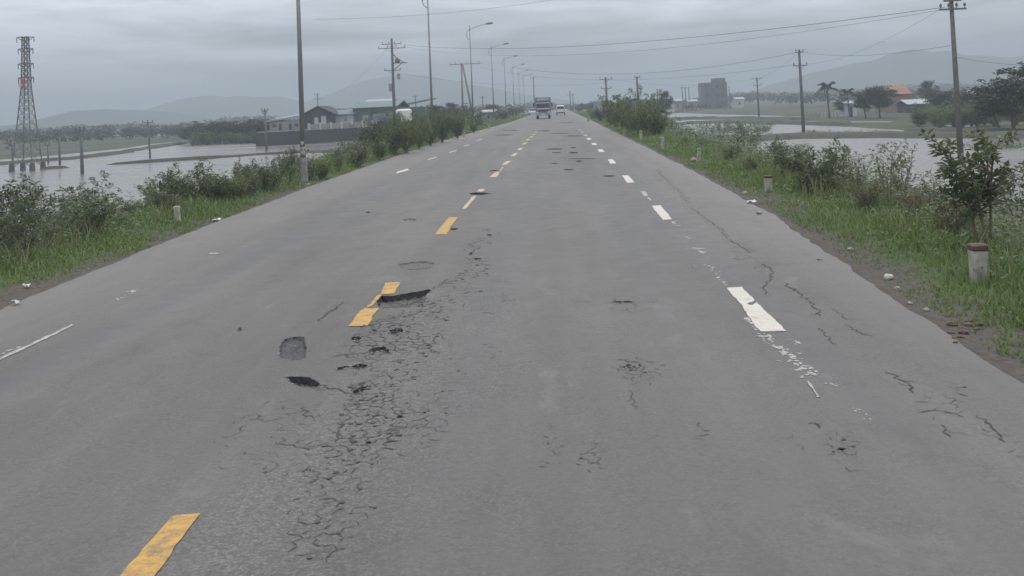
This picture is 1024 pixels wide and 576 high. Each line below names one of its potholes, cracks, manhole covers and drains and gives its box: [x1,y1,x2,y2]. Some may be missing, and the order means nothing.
crack [214,228,508,561]
crack [537,424,605,472]
crack [885,371,1015,452]
pothole [375,289,431,308]
pothole [284,375,322,388]
crack [810,422,859,471]
crack [616,357,664,407]
